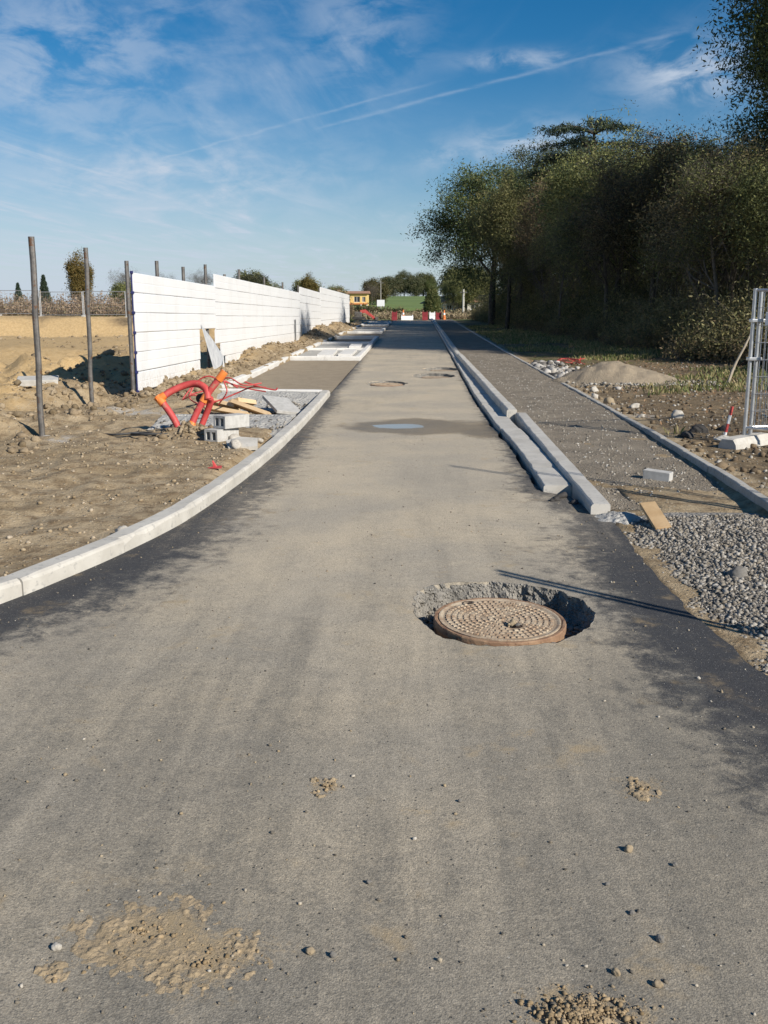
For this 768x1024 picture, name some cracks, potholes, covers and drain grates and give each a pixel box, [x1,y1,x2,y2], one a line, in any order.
manhole cover [433,597,566,646]
